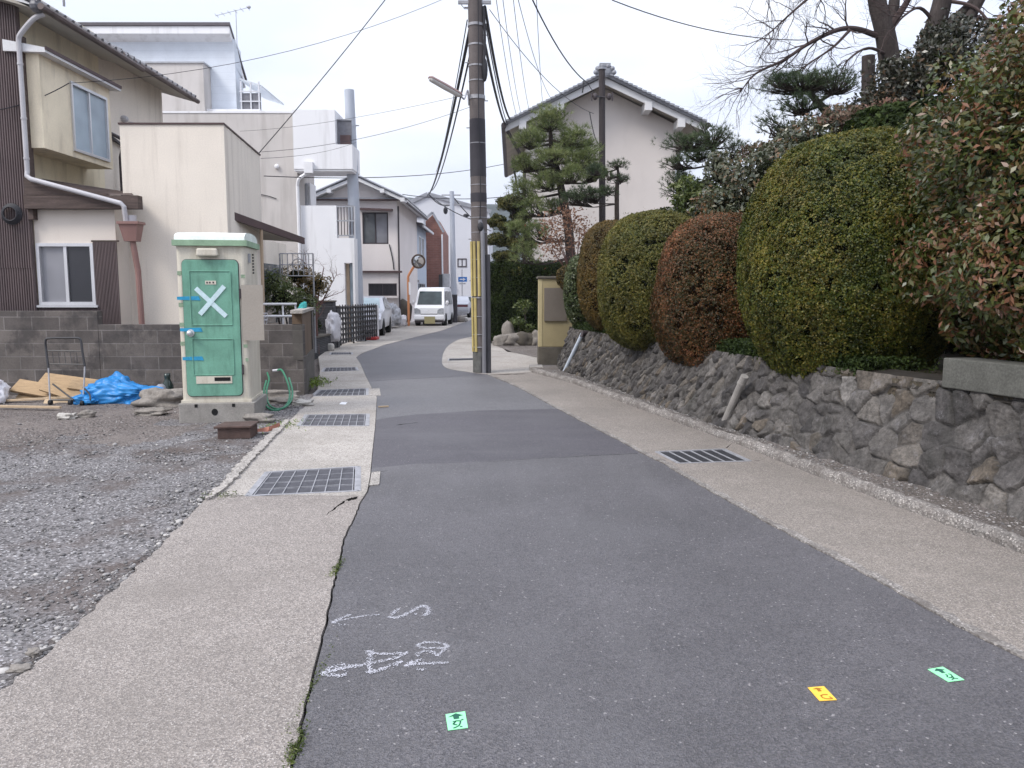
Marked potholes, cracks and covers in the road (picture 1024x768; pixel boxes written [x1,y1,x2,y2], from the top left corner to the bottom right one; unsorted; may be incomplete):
drain grate [655,448,752,464]
drain grate [296,414,370,426]
drain grate [313,388,369,396]
drain grate [245,466,361,496]
